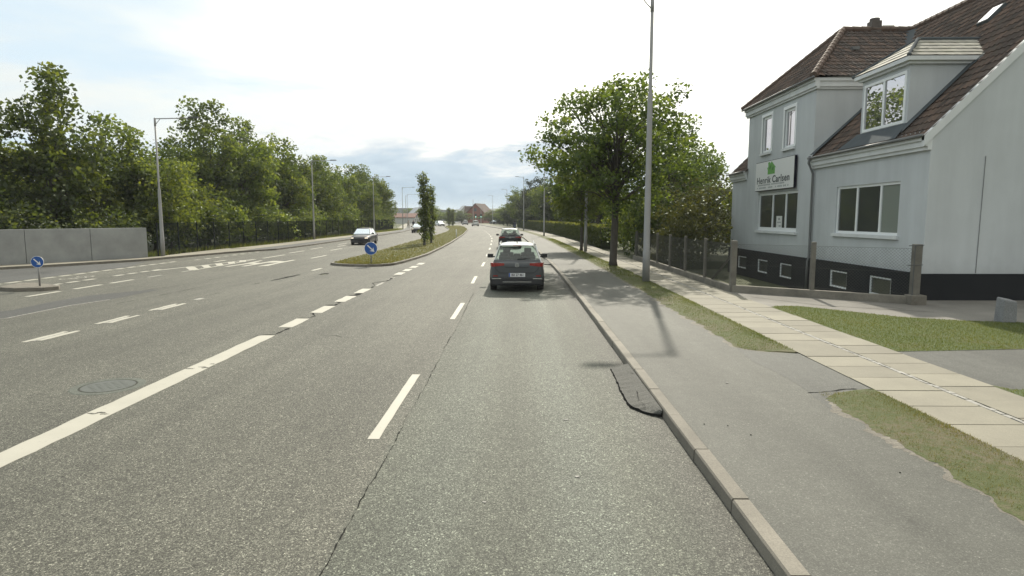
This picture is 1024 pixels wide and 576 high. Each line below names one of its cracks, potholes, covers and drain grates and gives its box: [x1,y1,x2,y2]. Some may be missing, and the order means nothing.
crack [319,352,443,576]
manhole cover [68,378,147,395]
